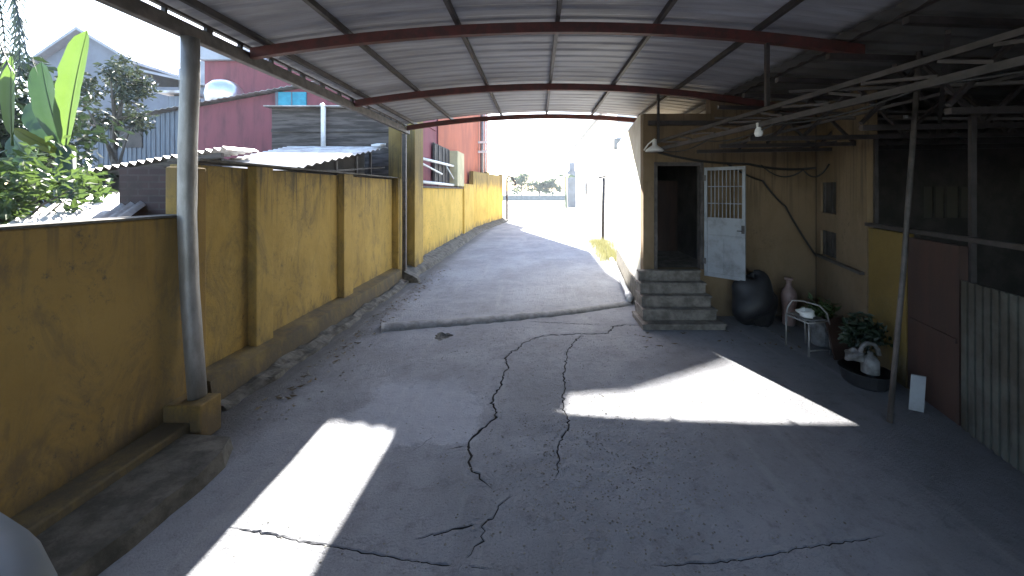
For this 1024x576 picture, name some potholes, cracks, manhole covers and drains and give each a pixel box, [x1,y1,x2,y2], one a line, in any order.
crack [647,528,894,575]
crack [405,320,640,570]
